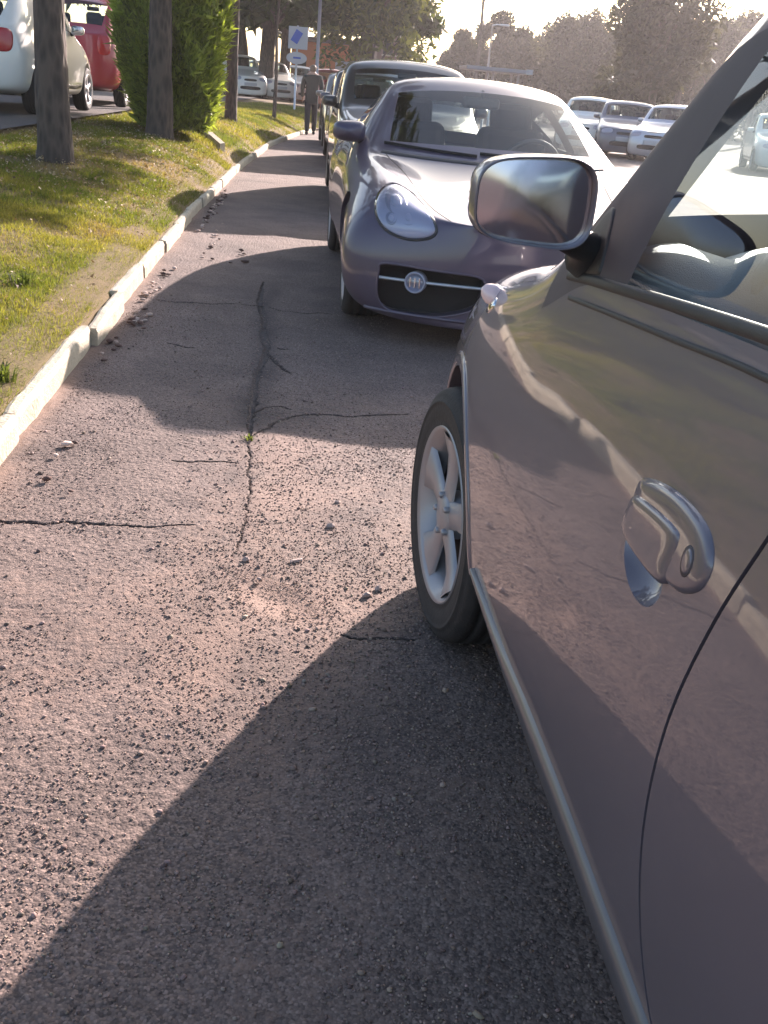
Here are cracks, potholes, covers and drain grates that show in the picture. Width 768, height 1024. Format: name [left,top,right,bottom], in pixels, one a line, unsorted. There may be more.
crack [162,282,408,556]
